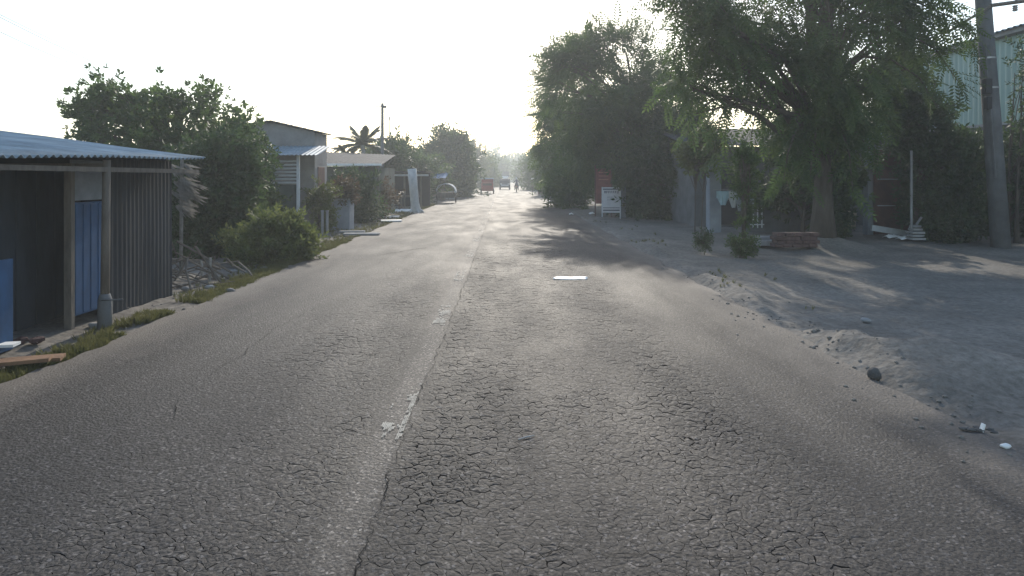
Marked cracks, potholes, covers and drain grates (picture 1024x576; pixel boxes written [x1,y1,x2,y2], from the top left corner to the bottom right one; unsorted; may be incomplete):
crack [351,235,993,576]
crack [1,244,470,576]
